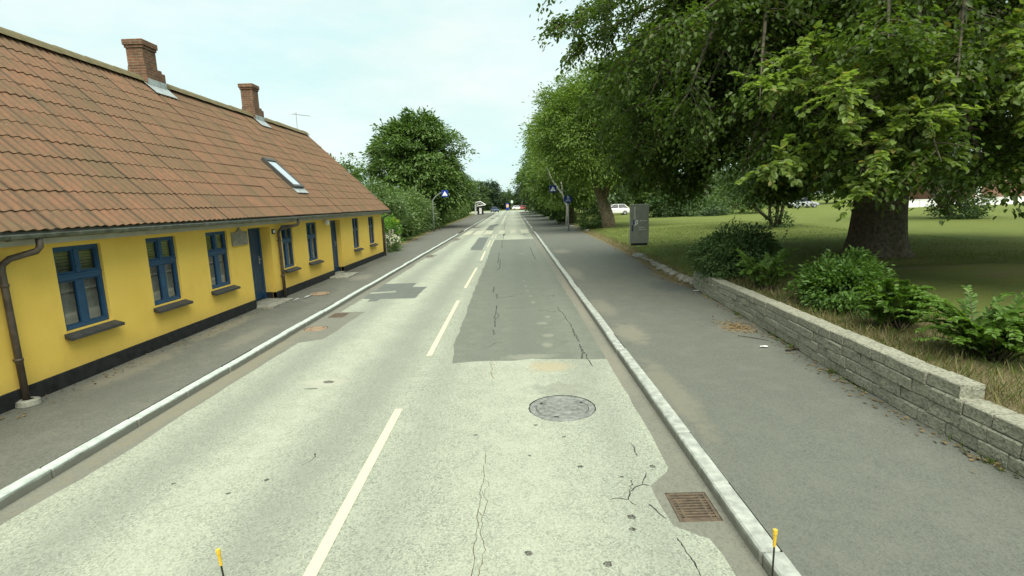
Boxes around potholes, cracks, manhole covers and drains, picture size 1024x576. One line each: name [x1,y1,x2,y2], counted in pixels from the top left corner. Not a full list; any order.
crack [471,453,489,576]
drain grate [665,492,723,522]
crack [540,295,593,366]
crack [609,475,666,519]
crack [485,287,523,378]
manhole cover [528,395,596,422]
